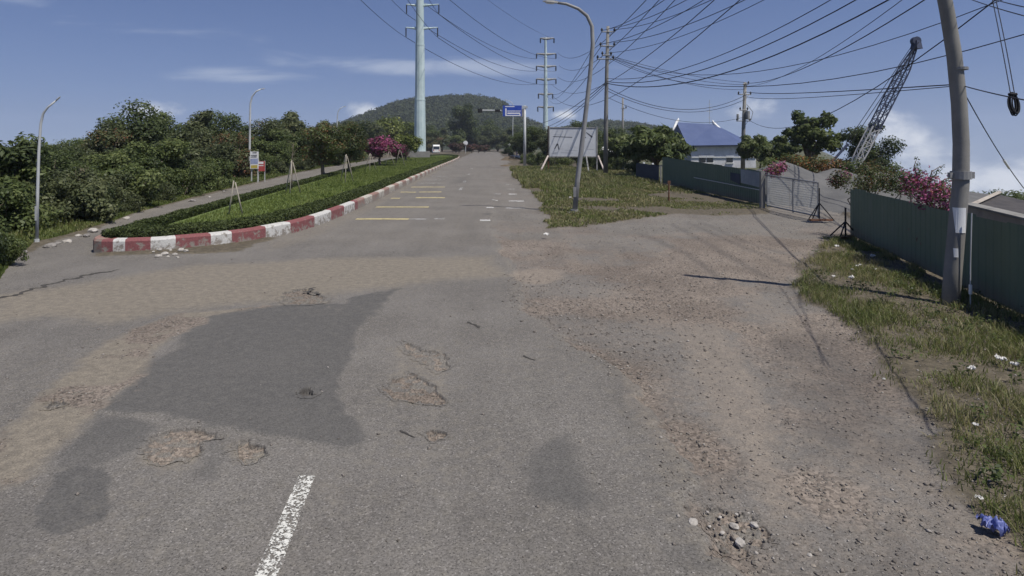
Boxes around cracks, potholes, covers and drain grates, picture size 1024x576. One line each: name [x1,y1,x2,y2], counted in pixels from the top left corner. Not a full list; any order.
pothole [697,503,780,560]
crack [0,270,114,298]
pothole [137,425,226,467]
pothole [296,385,322,399]
pothole [378,370,448,406]
pothole [276,286,334,306]
pothole [394,338,458,374]
pothole [221,437,271,465]
pothole [418,427,450,443]
